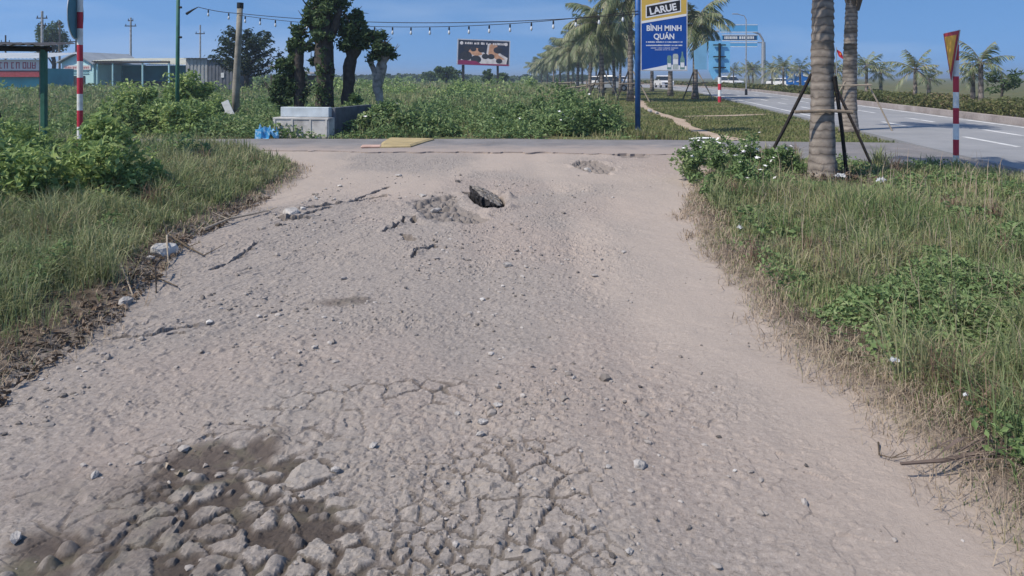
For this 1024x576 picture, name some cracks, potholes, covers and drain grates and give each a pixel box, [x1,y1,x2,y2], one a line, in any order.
crack [383,215,438,258]
pothole [571,160,615,175]
crack [0,376,618,576]
pothole [414,195,490,224]
crack [278,186,391,221]
